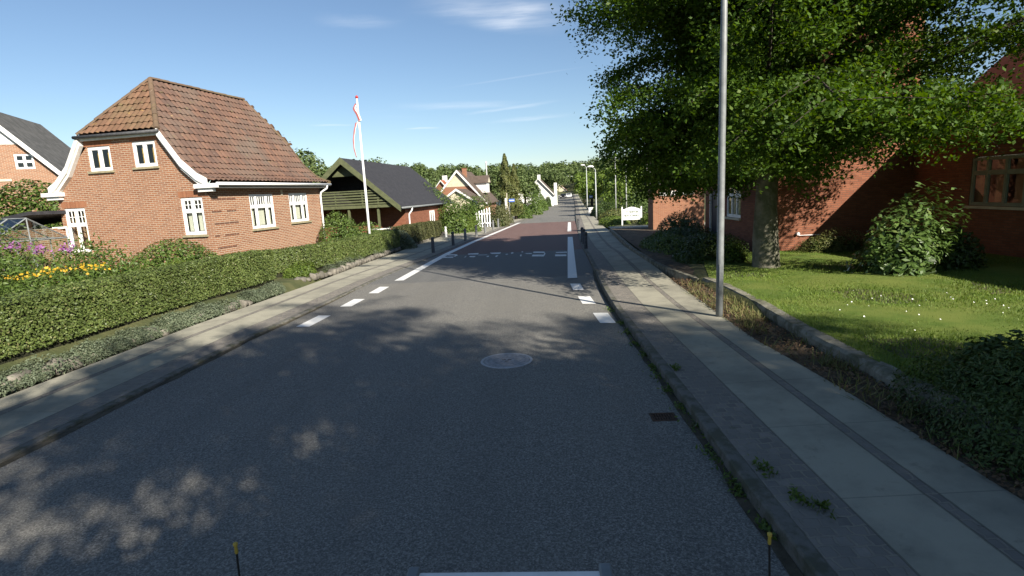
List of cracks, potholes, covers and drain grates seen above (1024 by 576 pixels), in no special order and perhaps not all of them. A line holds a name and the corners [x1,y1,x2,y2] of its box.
drain grate [649,412,678,422]
manhole cover [481,353,533,369]
